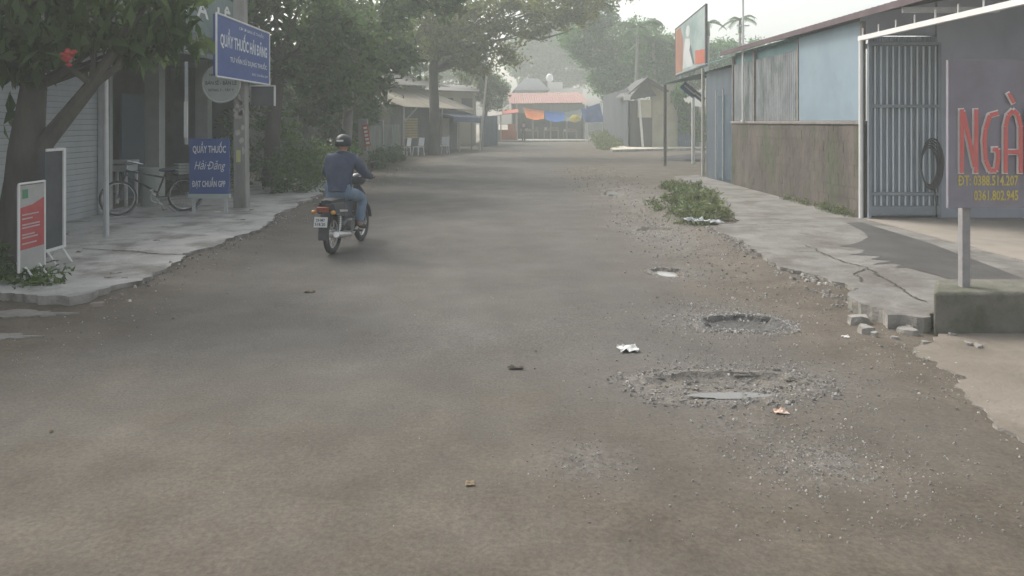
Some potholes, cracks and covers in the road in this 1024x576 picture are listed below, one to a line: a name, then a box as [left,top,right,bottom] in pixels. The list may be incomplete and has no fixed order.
pothole [606,365,842,408]
crack [799,245,927,302]
pothole [645,266,689,279]
pothole [688,311,802,336]
